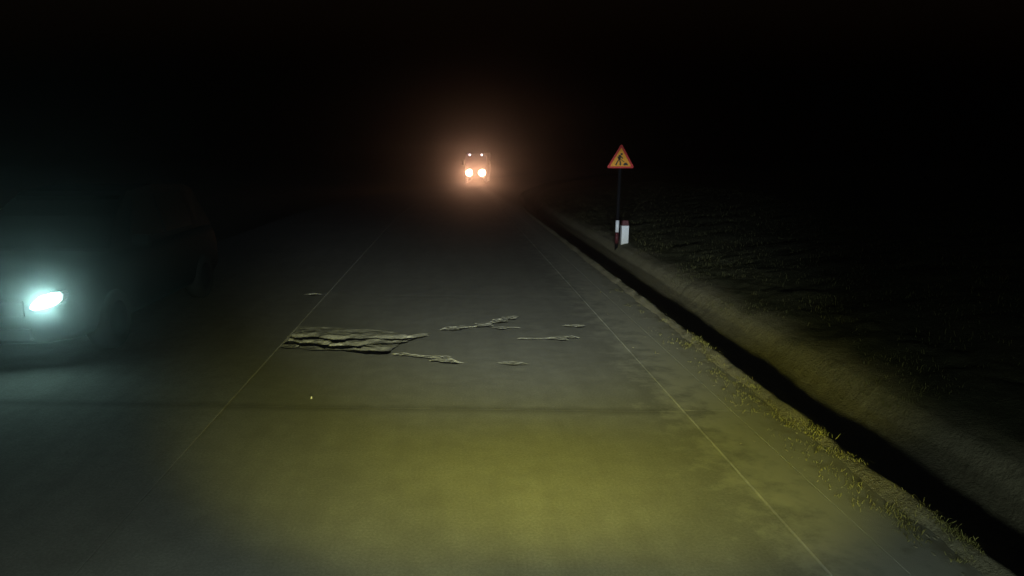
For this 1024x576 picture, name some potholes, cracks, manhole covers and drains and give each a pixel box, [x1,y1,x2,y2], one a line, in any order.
pothole [281,327,430,355]
